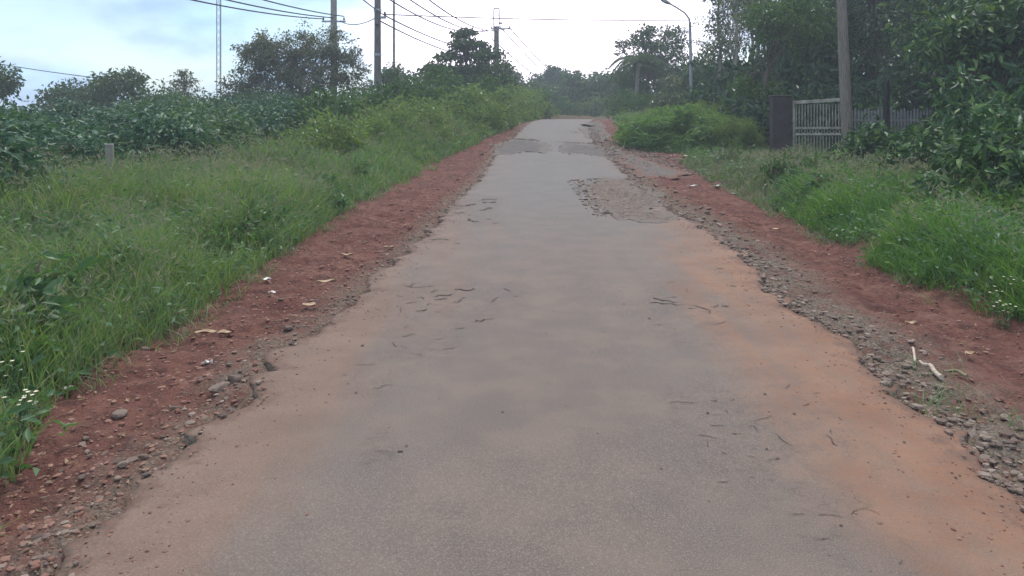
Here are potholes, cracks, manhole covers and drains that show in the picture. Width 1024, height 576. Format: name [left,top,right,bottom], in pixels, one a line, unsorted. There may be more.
crack [651,296,728,324]
pothole [582,178,680,223]
crack [392,283,515,355]
